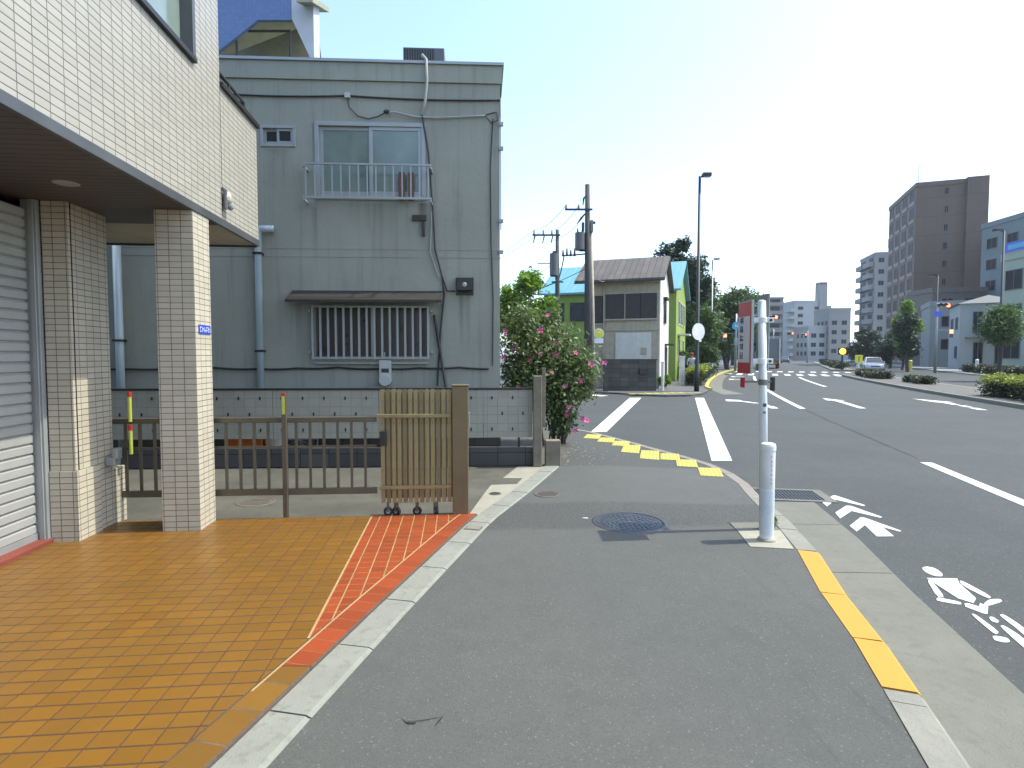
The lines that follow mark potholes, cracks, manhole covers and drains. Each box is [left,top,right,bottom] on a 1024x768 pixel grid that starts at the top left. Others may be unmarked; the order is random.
drain grate [752,487,839,503]
manhole cover [235,497,275,507]
manhole cover [592,512,667,533]
